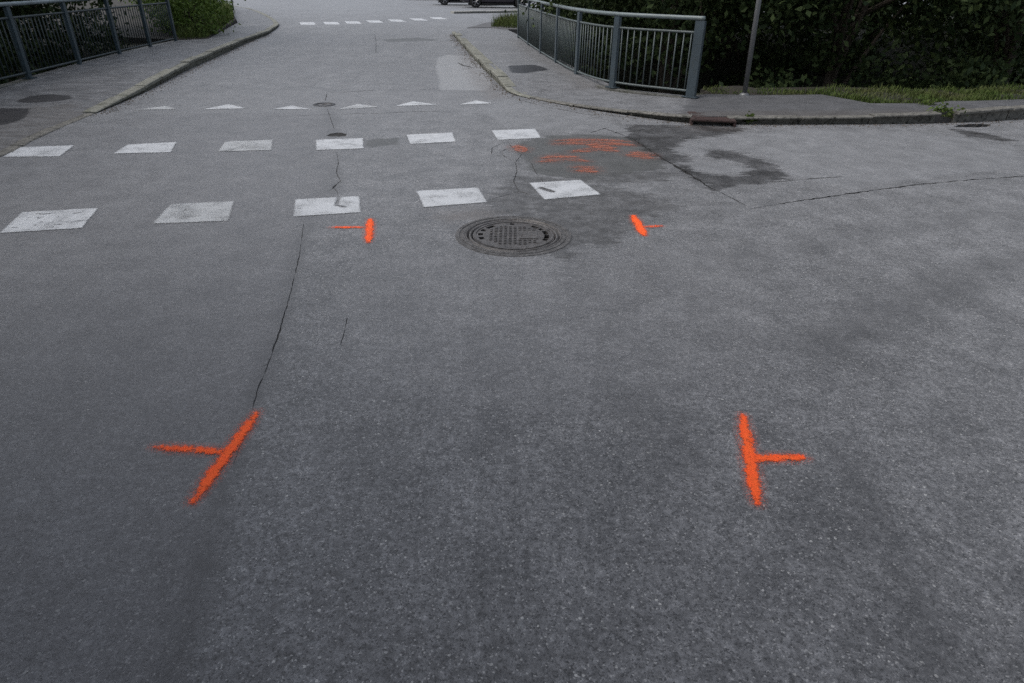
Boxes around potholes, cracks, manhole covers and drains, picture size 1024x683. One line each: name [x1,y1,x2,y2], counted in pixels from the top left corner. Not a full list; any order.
manhole cover [455,216,572,257]
crack [232,223,306,462]
crack [491,141,544,199]
